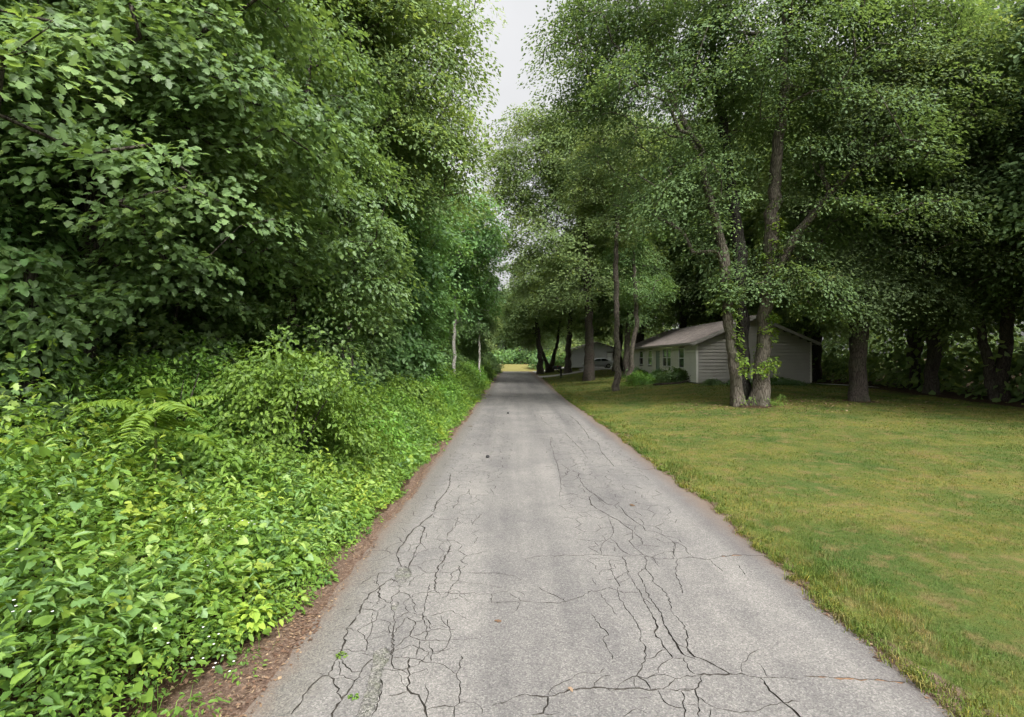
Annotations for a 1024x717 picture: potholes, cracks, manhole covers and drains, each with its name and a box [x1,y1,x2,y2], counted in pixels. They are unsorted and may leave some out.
crack [291,412,905,717]
